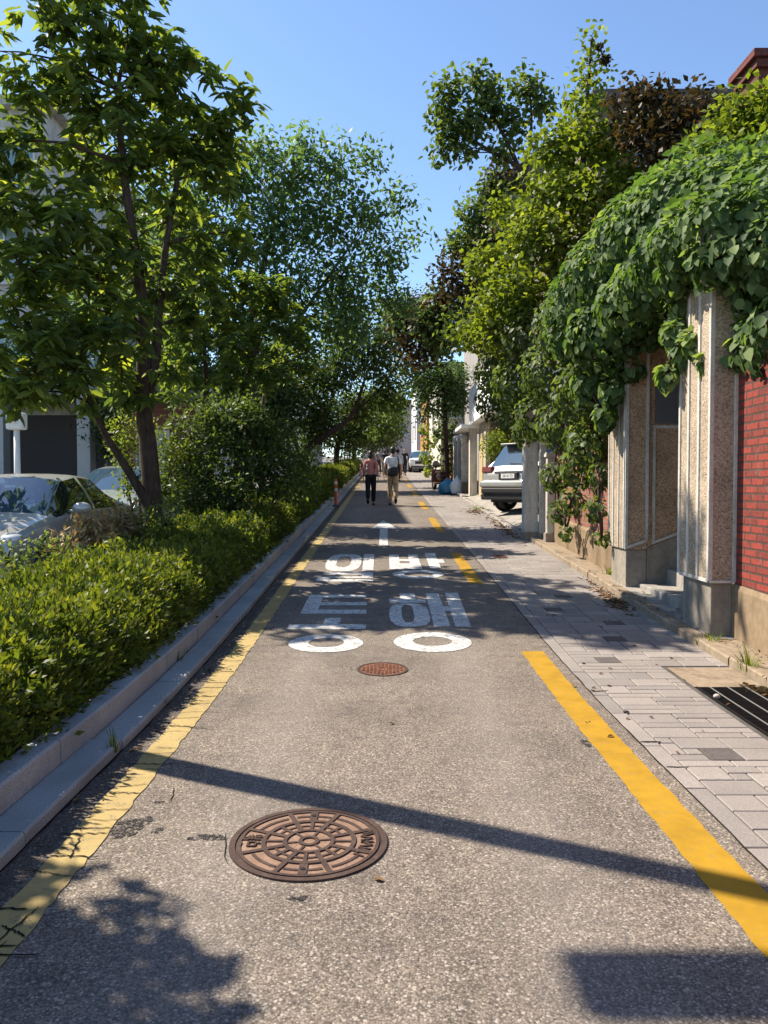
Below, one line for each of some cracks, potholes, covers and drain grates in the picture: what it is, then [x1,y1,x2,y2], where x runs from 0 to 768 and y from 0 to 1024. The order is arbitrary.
manhole cover [357,662,408,676]
manhole cover [229,808,387,883]
crack [0,907,41,955]
drain grate [696,686,768,737]
